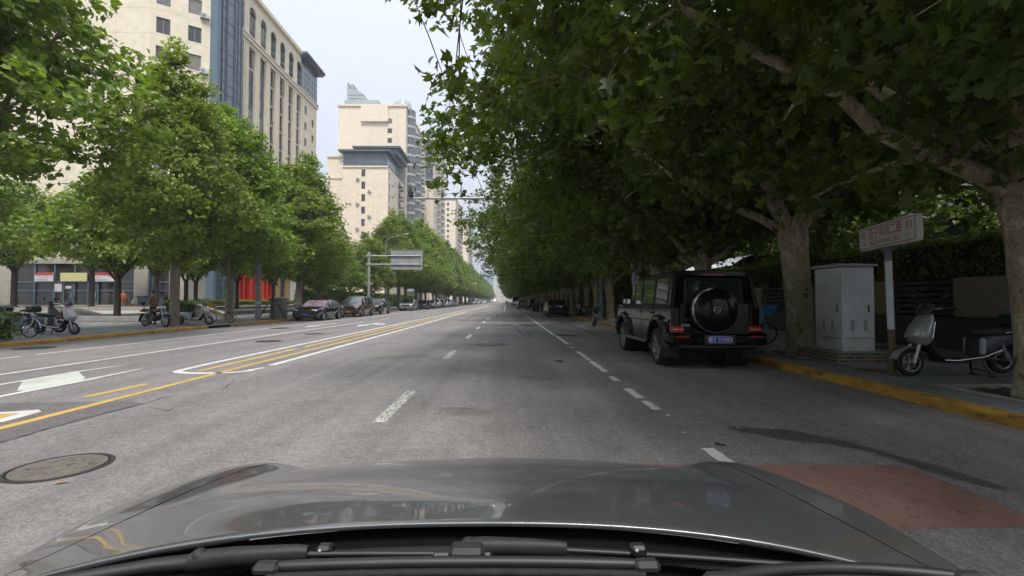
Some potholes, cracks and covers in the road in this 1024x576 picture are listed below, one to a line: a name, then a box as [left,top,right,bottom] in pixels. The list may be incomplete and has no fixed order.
manhole cover [0,453,116,483]
